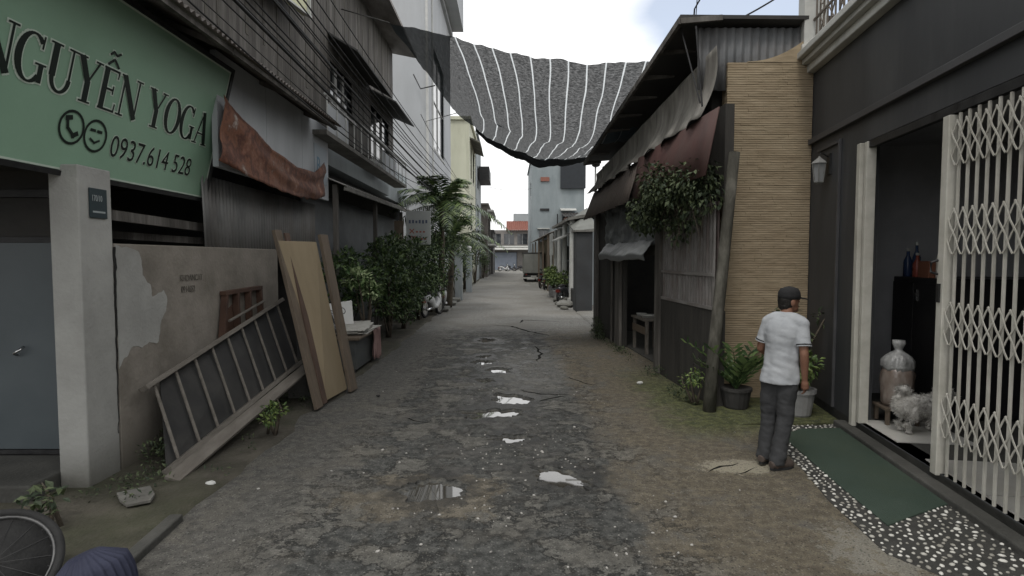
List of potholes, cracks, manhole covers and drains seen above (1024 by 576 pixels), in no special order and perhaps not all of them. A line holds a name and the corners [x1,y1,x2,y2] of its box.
crack [710,463,755,475]
crack [497,320,559,362]
pothole [487,433,534,443]
pothole [452,408,525,419]
crack [522,377,599,401]
pothole [393,477,471,503]
pothole [491,392,535,404]
pothole [527,464,598,491]
